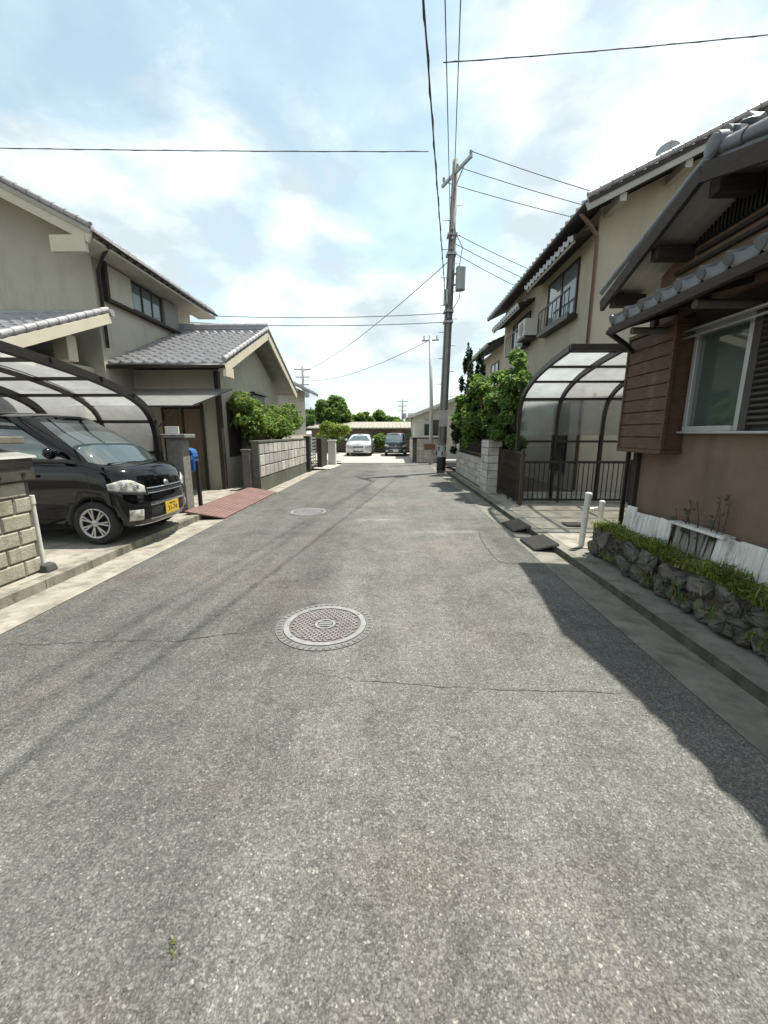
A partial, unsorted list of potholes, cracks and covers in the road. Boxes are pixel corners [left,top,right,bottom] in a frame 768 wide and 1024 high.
crack [8,630,261,645]
manhole cover [287,508,329,516]
crack [308,671,667,697]
manhole cover [275,604,374,651]
